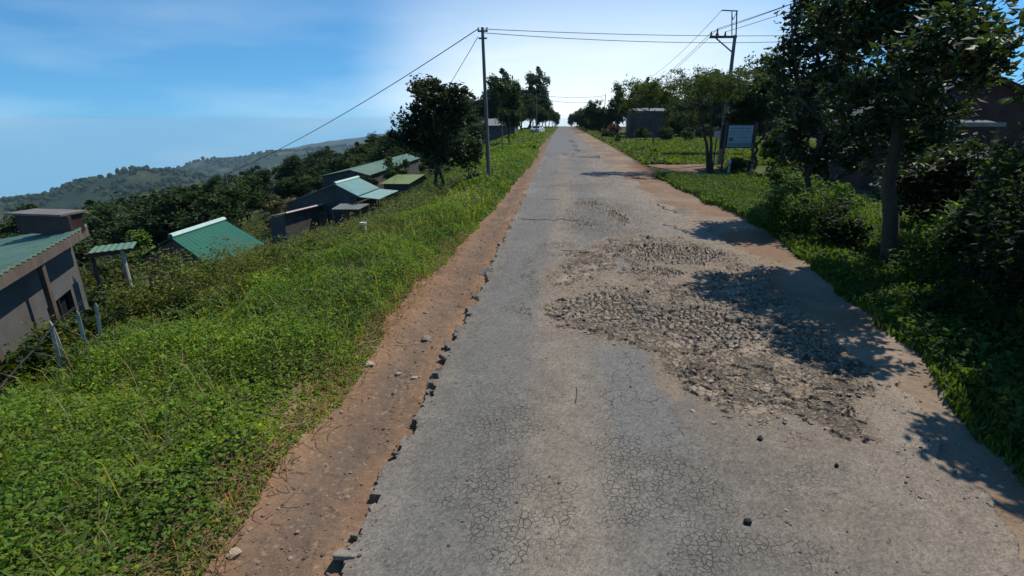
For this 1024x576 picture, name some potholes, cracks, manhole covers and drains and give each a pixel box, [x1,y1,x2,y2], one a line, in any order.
pothole [554,291,657,326]
crack [421,196,988,576]
pothole [624,266,693,277]
pothole [605,242,730,267]
pothole [605,209,634,226]
pothole [640,304,777,350]
pothole [706,270,764,285]
